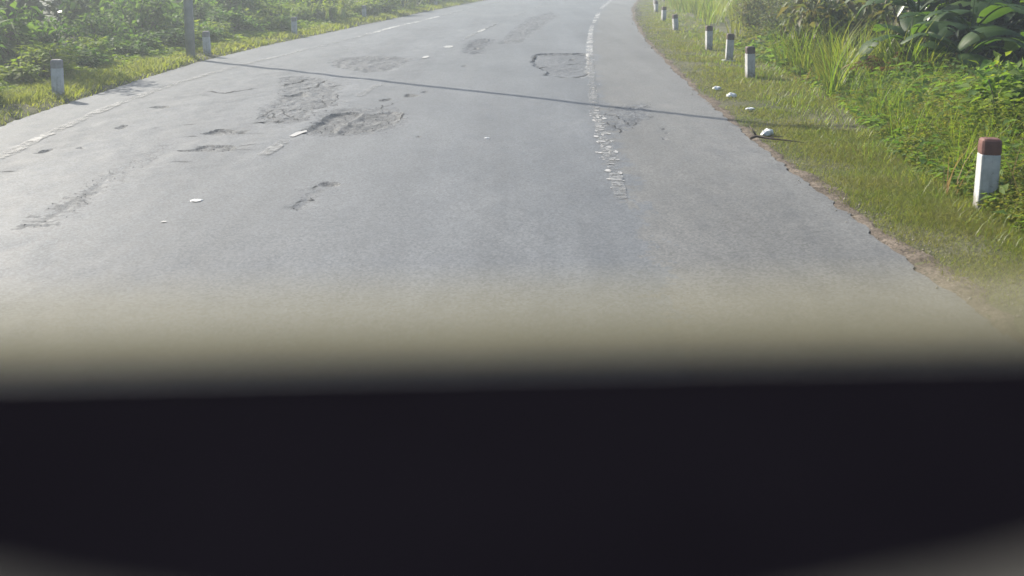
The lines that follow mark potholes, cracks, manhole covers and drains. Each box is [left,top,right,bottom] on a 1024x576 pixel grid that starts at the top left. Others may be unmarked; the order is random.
pothole [336,112,403,135]
crack [236,79,339,150]
pothole [177,144,237,152]
pothole [298,112,363,134]
